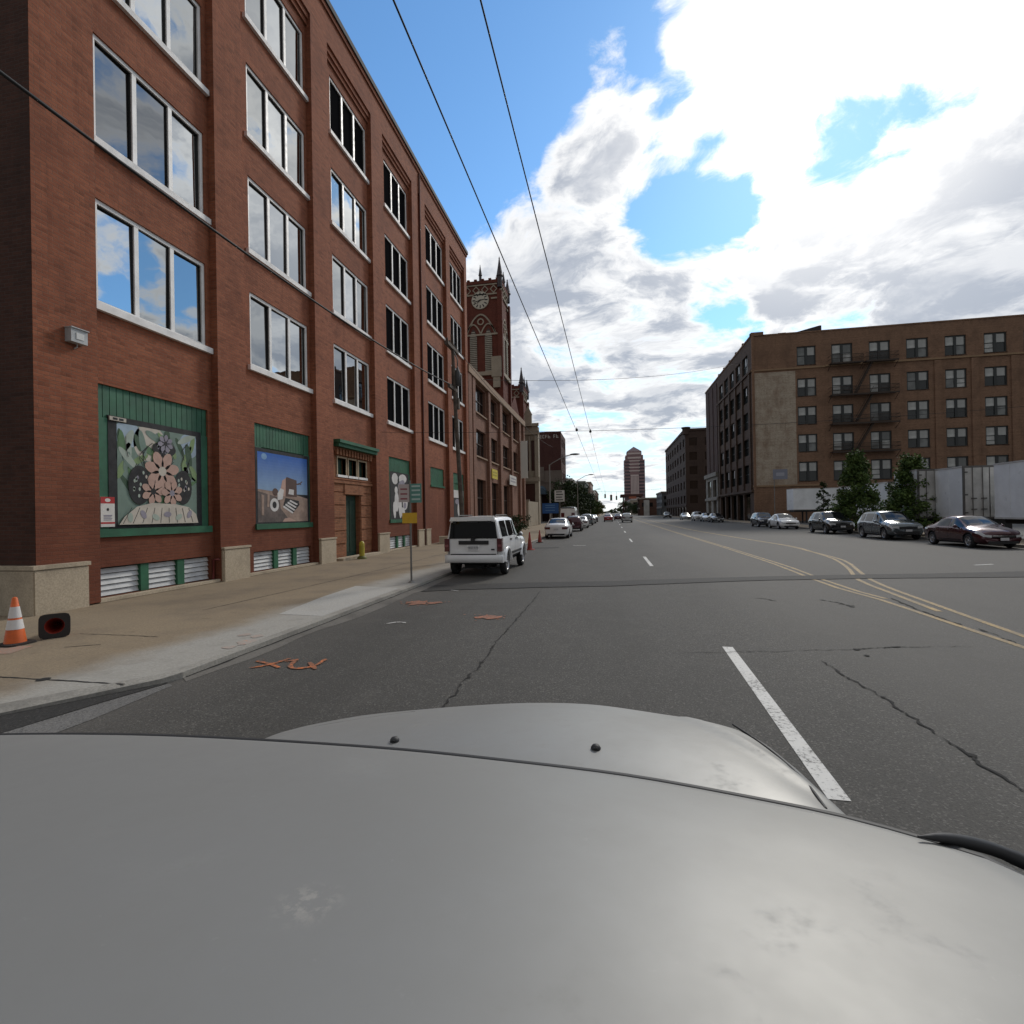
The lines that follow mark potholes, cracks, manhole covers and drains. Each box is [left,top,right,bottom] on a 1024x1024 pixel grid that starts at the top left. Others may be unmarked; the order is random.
crack [684,646,1024,791]
crack [441,592,539,708]
